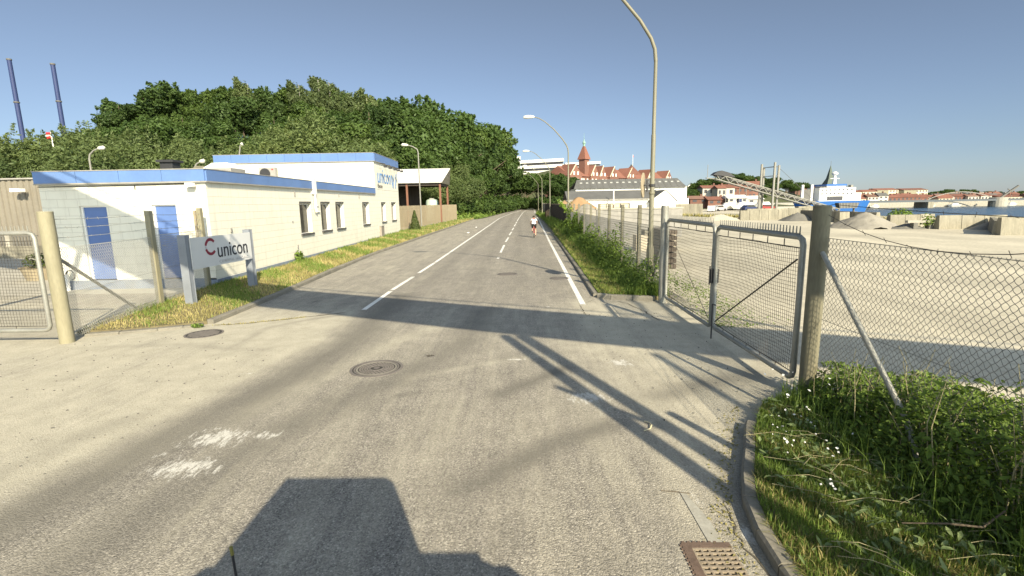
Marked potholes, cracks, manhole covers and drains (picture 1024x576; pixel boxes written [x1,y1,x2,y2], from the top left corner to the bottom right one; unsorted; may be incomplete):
manhole cover [349,360,403,377]
manhole cover [183,329,224,339]
drain grate [679,541,749,576]
